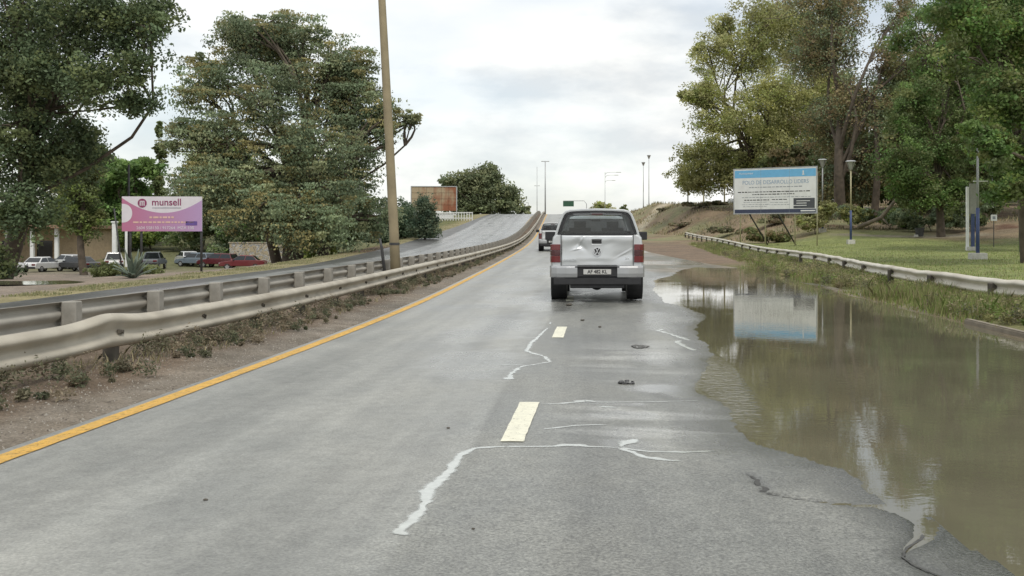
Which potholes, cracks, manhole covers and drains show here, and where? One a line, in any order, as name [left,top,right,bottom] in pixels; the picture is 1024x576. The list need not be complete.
crack [749,475,940,576]
crack [391,400,709,535]
crack [501,322,552,379]
crack [656,329,695,350]
